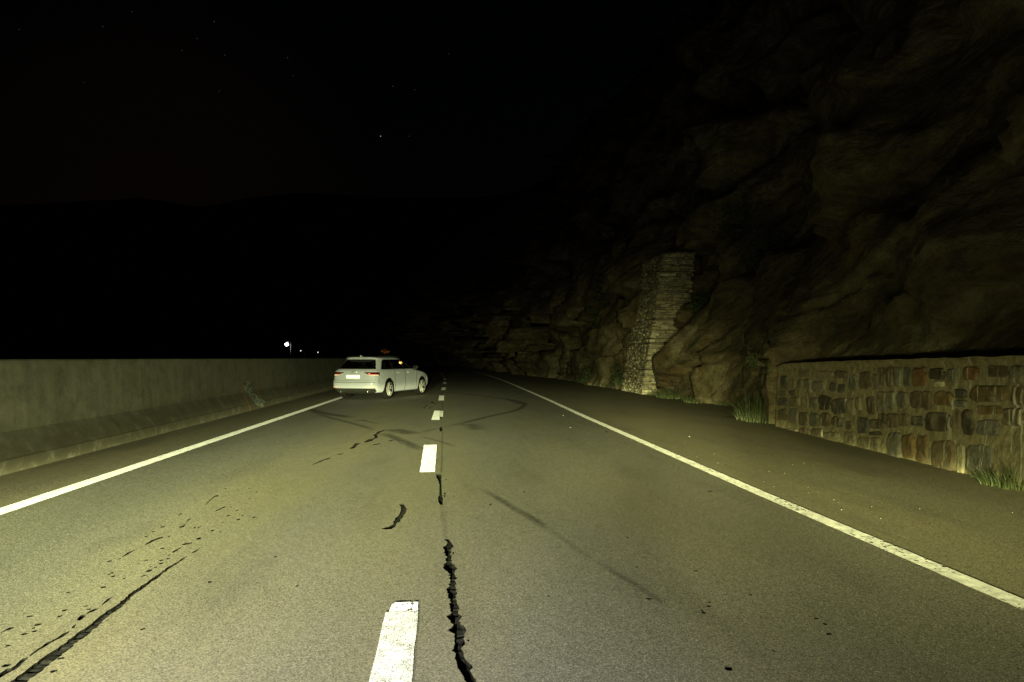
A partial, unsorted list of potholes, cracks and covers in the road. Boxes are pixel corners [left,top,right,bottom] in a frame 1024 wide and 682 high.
crack [443,539,476,682]
crack [0,495,225,682]
crack [382,504,407,529]
crack [312,430,392,465]
